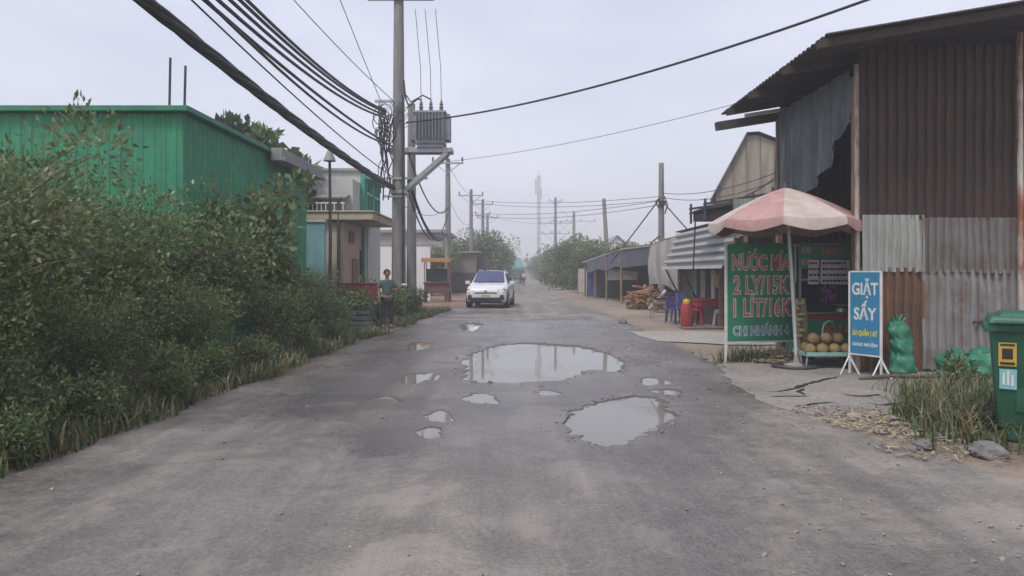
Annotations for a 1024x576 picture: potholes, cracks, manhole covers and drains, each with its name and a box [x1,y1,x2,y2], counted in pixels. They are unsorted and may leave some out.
pothole [409,425,446,439]
pothole [460,393,500,404]
pothole [649,388,687,397]
pothole [457,322,484,331]
pothole [423,409,456,424]
pothole [359,396,403,411]
pothole [640,377,674,386]
pothole [405,342,436,351]
pothole [555,392,685,448]
pothole [445,342,637,386]
crack [768,376,894,407]
pothole [396,372,441,387]
